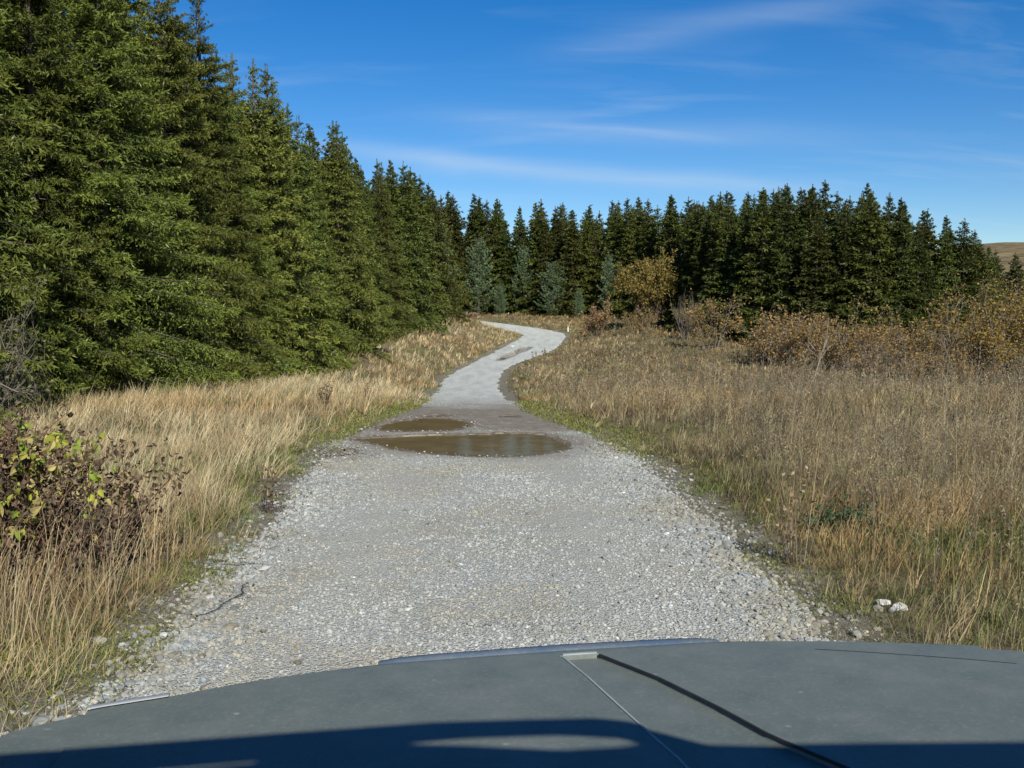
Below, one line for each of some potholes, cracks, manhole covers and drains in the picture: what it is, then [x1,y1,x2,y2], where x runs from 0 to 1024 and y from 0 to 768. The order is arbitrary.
pothole [371,418,475,432]
pothole [346,432,573,458]
crack [196,562,253,617]
pothole [495,346,533,361]
